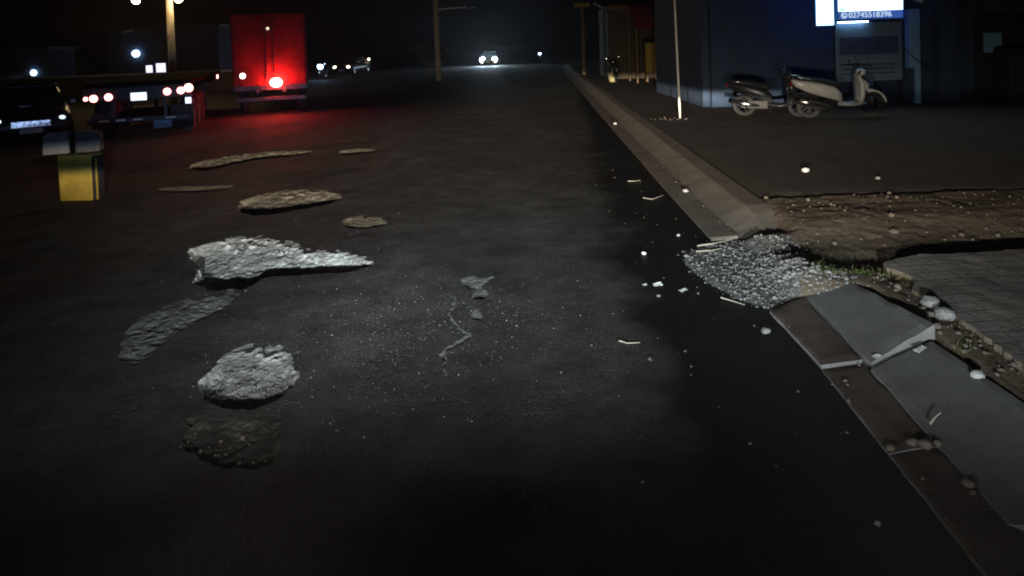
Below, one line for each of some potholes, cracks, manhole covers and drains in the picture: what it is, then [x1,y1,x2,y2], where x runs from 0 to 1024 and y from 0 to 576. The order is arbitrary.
crack [439,296,472,377]
